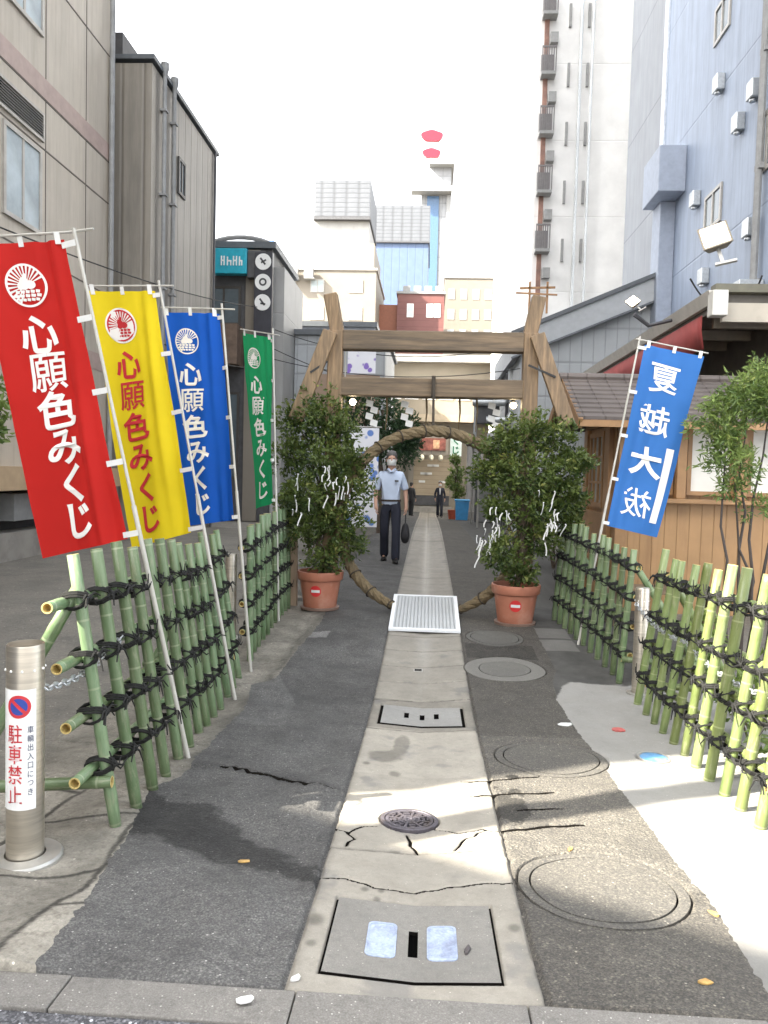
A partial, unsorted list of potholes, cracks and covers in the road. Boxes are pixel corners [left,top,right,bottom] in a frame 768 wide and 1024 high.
manhole cover [518,853,691,931]
crack [220,766,333,789]
crack [320,878,513,894]
manhole cover [465,657,545,682]
crack [335,777,585,856]
manhole cover [380,809,438,834]
manhole cover [495,742,608,778]
manhole cover [466,630,523,646]
